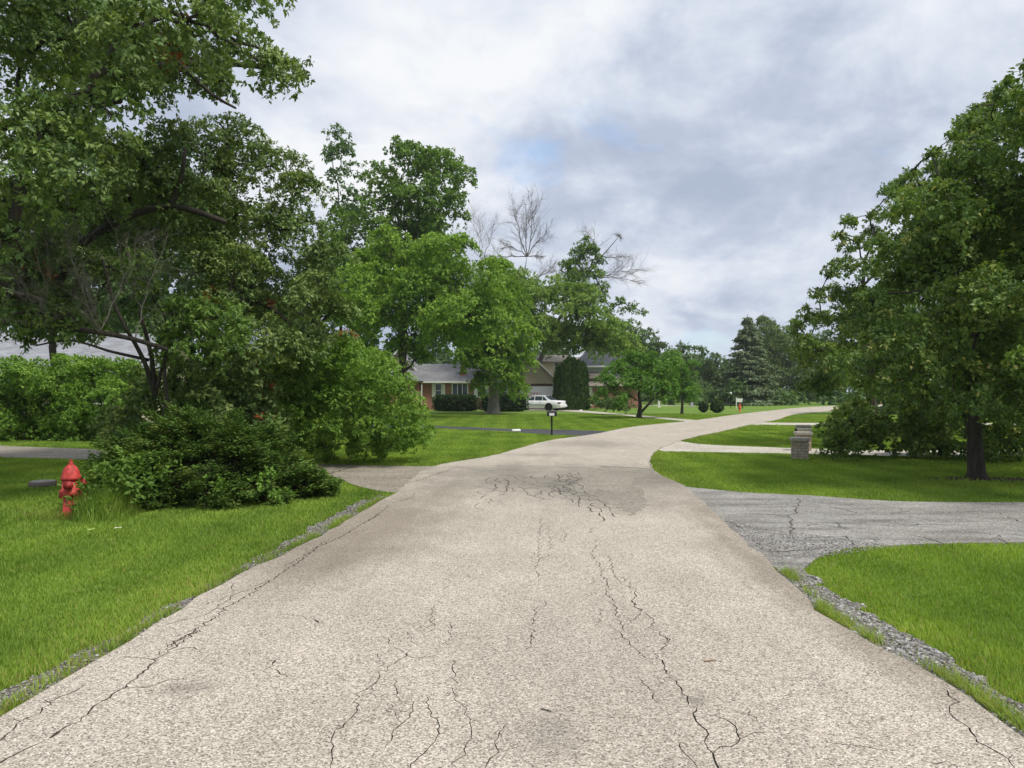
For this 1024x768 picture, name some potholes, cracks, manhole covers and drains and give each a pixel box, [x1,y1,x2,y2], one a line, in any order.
crack [0,515,377,763]
crack [726,498,1024,552]
crack [330,600,506,768]
crack [828,688,1015,768]
crack [474,472,759,768]
